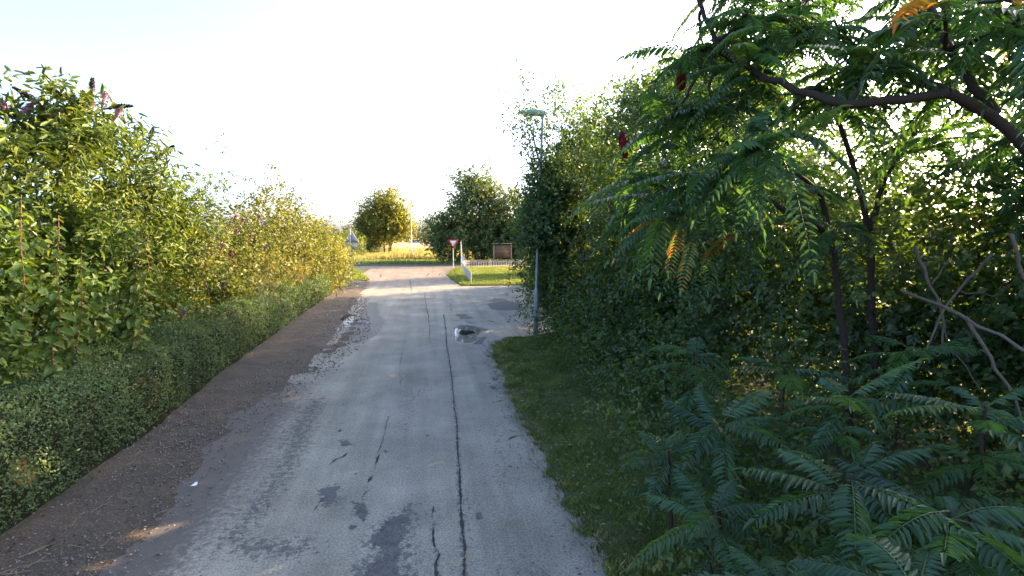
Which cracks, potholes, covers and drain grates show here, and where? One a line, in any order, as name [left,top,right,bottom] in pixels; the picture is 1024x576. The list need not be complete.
pothole [451,323,491,345]
crack [409,271,500,576]
crack [363,417,389,495]
